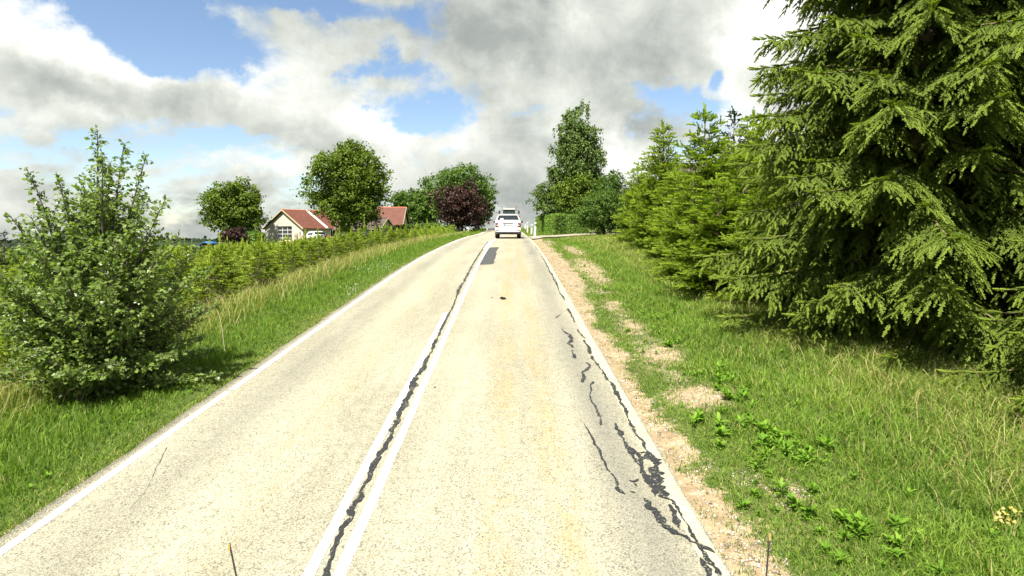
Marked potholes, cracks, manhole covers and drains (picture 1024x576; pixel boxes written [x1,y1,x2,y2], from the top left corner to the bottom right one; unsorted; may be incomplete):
crack [535,246,648,494]
